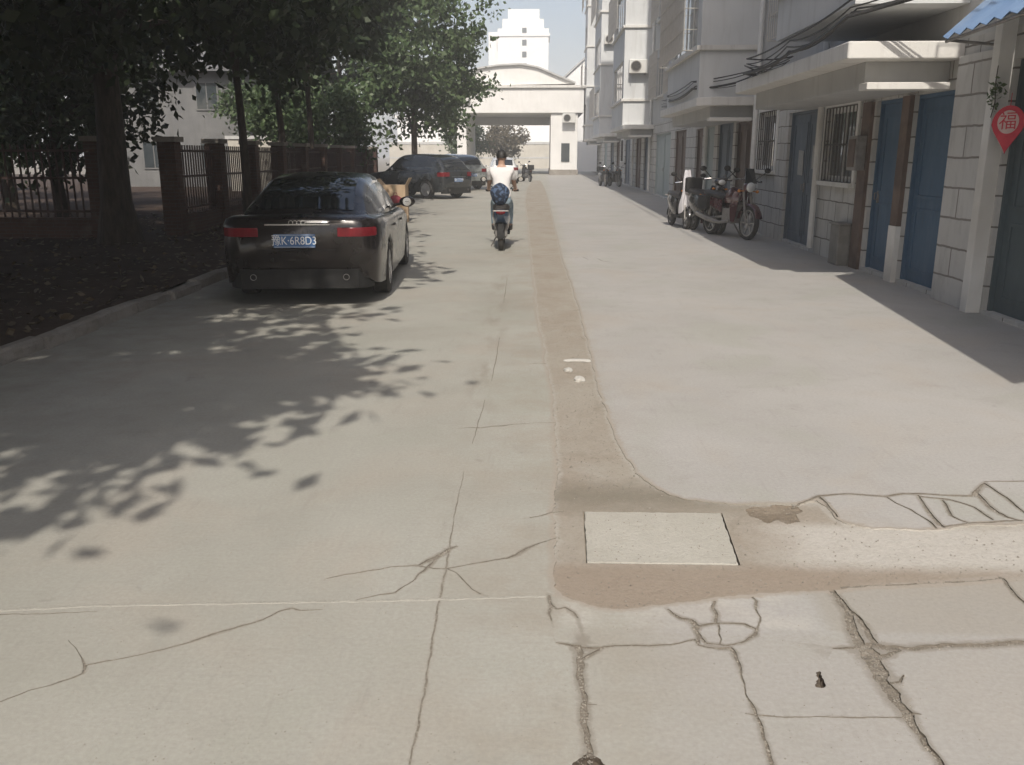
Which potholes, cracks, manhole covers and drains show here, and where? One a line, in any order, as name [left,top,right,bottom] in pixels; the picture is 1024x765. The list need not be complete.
crack [556,590,1024,765]
crack [326,283,555,764]
crack [0,608,321,702]
crack [548,595,578,620]
crack [796,481,1024,529]
manhole cover [584,512,738,565]
